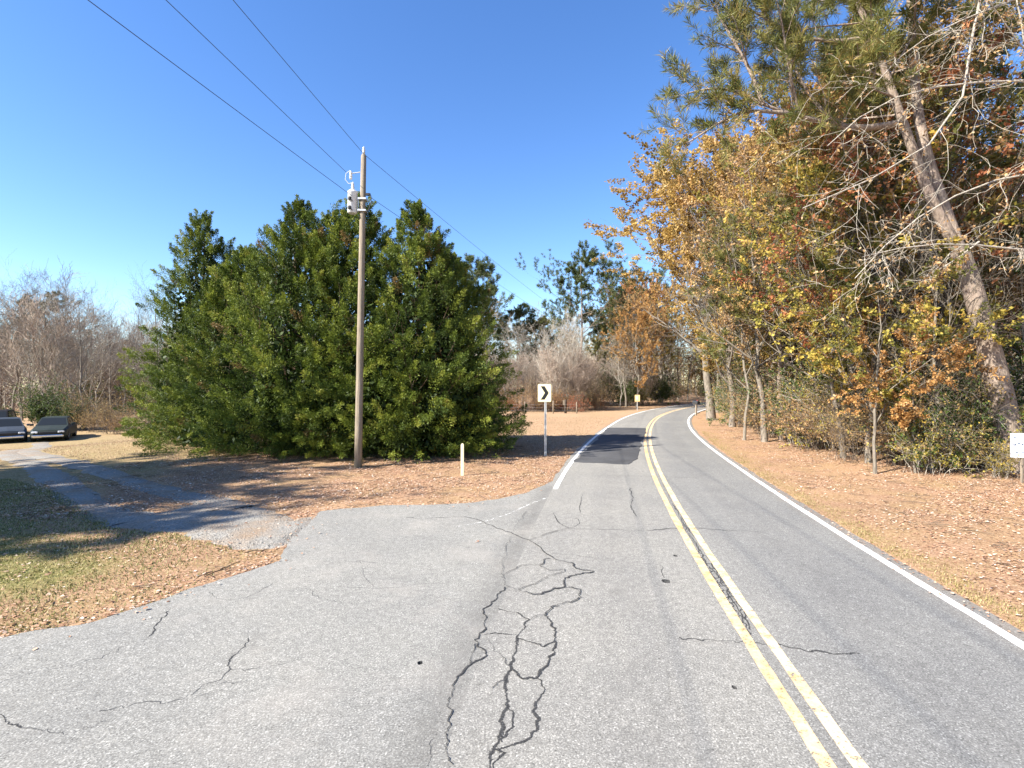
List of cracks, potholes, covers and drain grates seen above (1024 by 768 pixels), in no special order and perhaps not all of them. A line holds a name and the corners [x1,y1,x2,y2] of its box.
crack [427,515,614,768]
crack [0,638,303,735]
